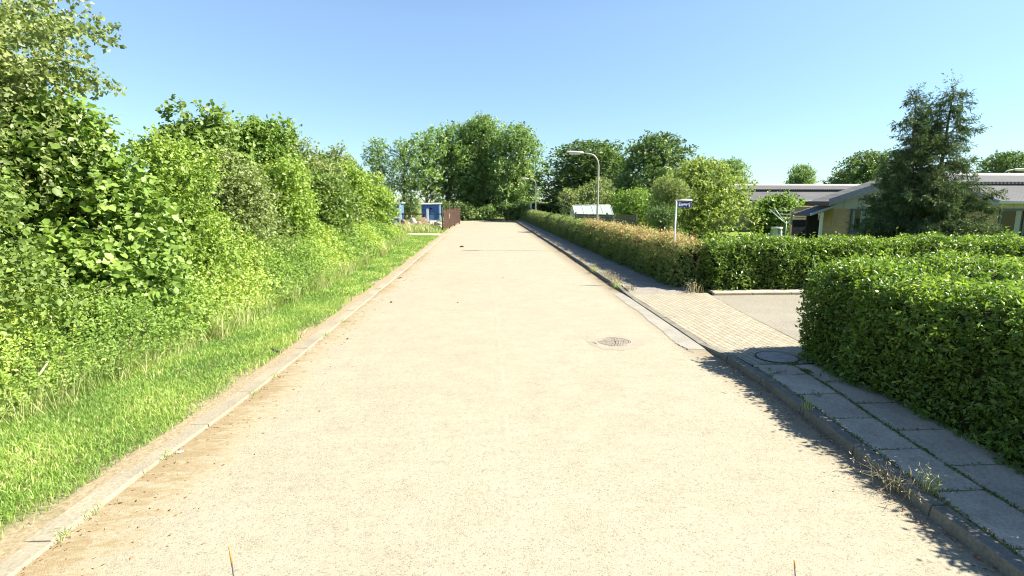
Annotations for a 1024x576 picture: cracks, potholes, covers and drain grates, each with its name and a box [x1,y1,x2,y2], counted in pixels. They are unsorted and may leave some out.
manhole cover [598,337,632,346]
manhole cover [755,351,799,365]
